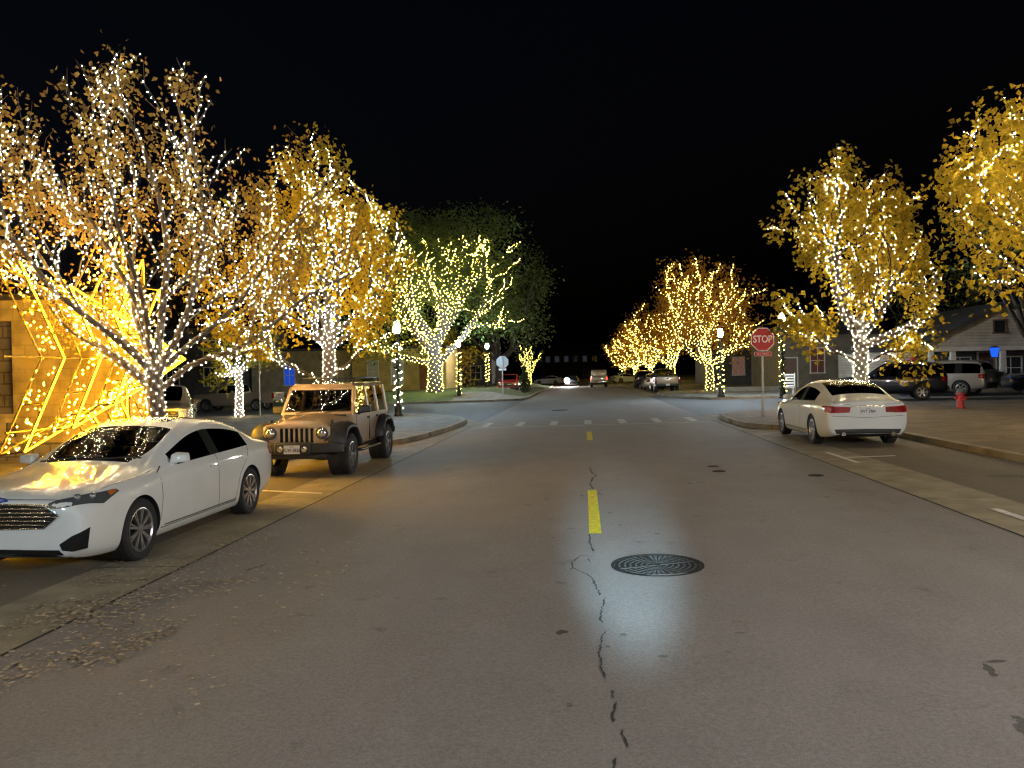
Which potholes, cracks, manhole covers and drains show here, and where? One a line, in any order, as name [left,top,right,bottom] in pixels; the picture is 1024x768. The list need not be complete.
manhole cover [611,554,704,577]
crack [571,534,628,768]
